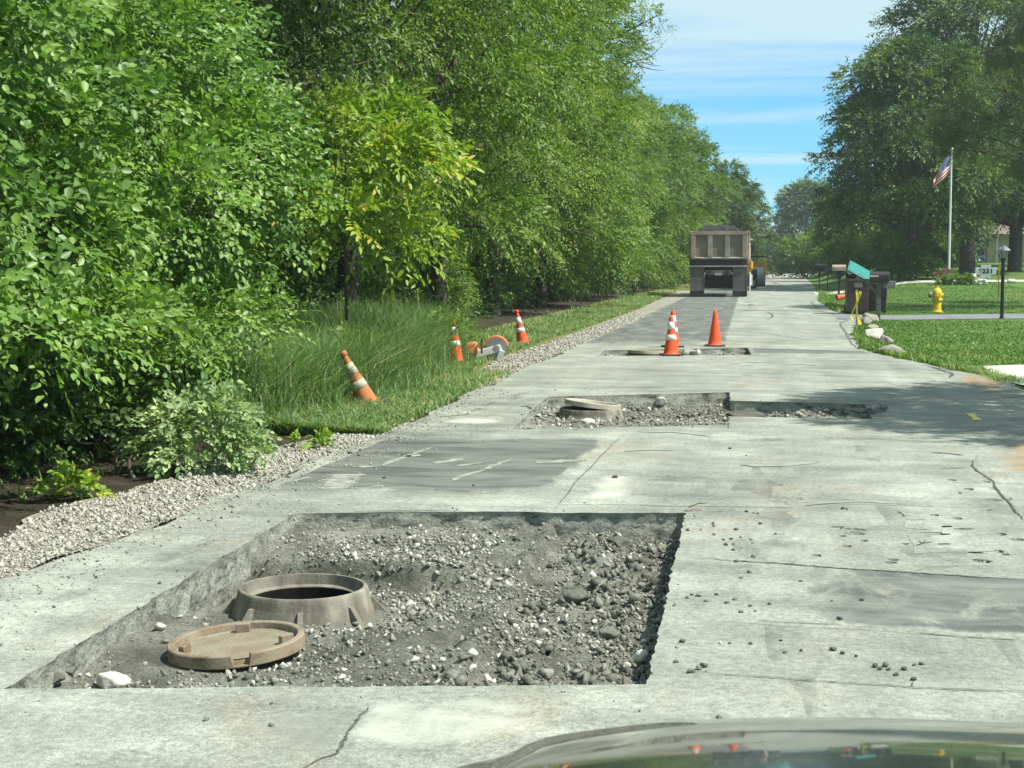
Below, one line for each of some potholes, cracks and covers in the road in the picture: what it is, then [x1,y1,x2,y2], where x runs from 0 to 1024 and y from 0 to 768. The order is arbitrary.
manhole cover [222,573,387,628]
manhole cover [556,406,628,421]
crack [556,435,624,508]
pothole [600,348,751,356]
manhole cover [167,620,306,670]
pothole [512,392,872,430]
crack [933,452,1024,520]
pothole [4,511,686,689]
manhole cover [564,398,621,410]
crack [303,705,369,768]
